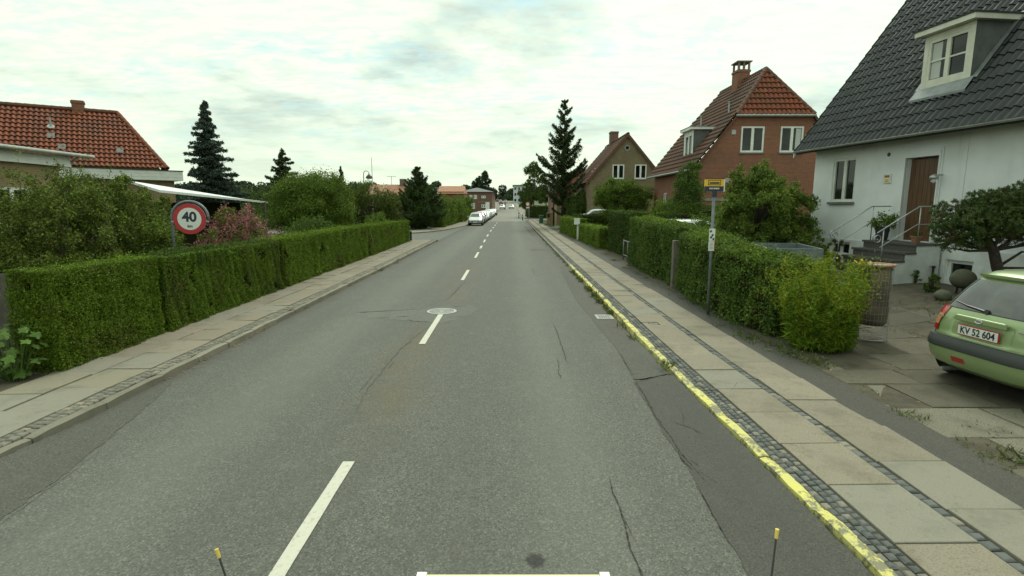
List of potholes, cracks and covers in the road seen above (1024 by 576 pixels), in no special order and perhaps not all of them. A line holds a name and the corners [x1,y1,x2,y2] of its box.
crack [610,482,643,576]
